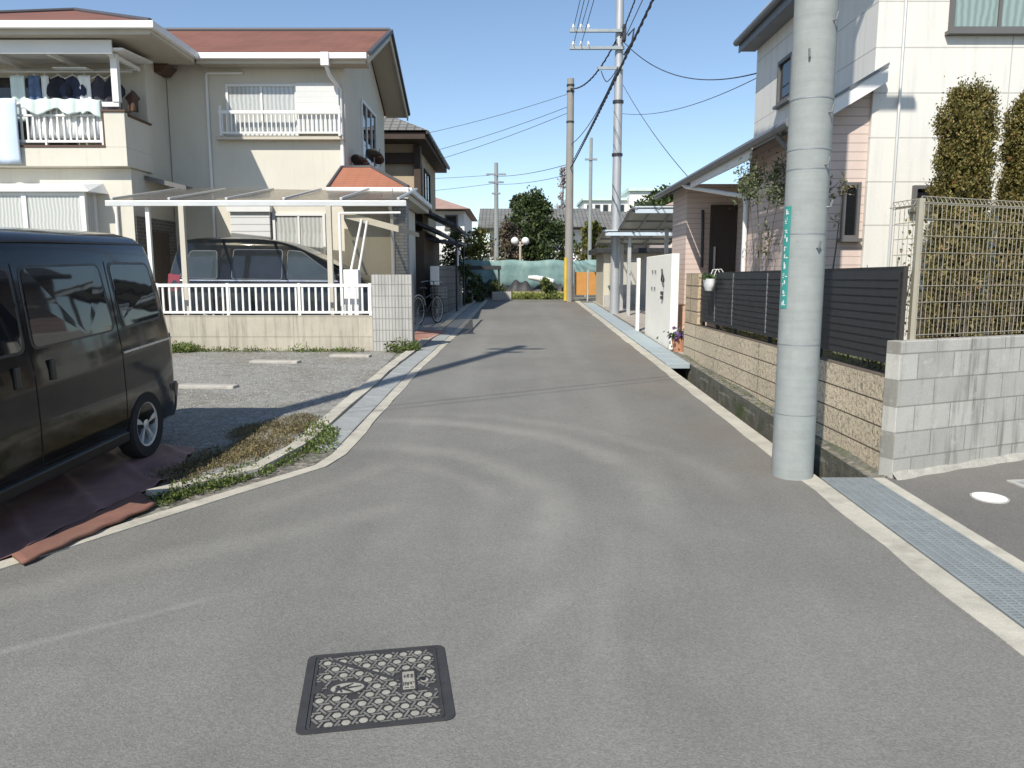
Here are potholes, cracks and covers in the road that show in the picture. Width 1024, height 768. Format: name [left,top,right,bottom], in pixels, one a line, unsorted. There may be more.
drain grate [821,477,942,524]
drain grate [882,522,1024,590]
drain grate [972,588,1024,629]
manhole cover [296,645,455,735]
